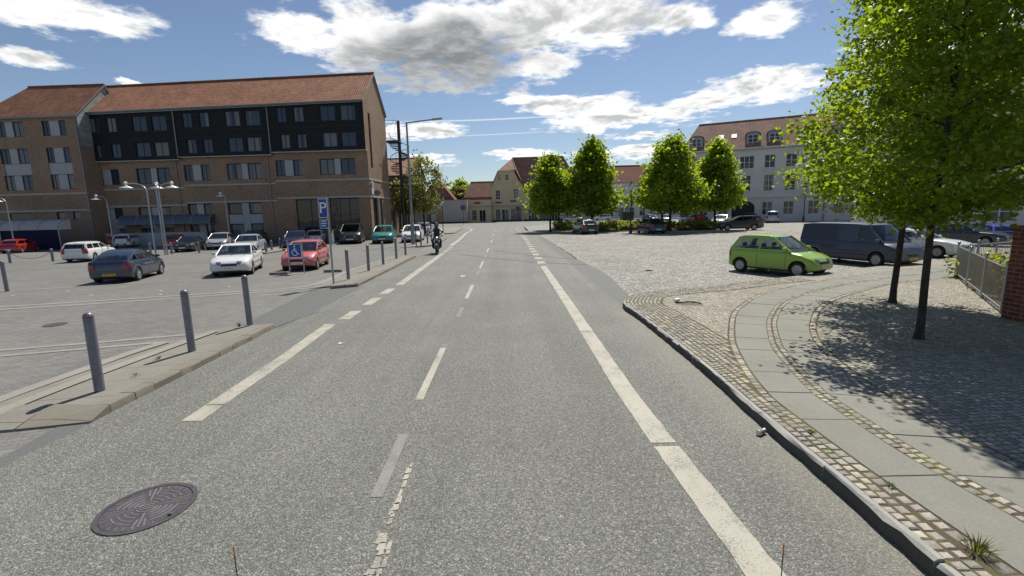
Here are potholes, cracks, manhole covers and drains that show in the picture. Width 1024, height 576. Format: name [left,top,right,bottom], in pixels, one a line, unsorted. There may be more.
manhole cover [91,483,198,536]
